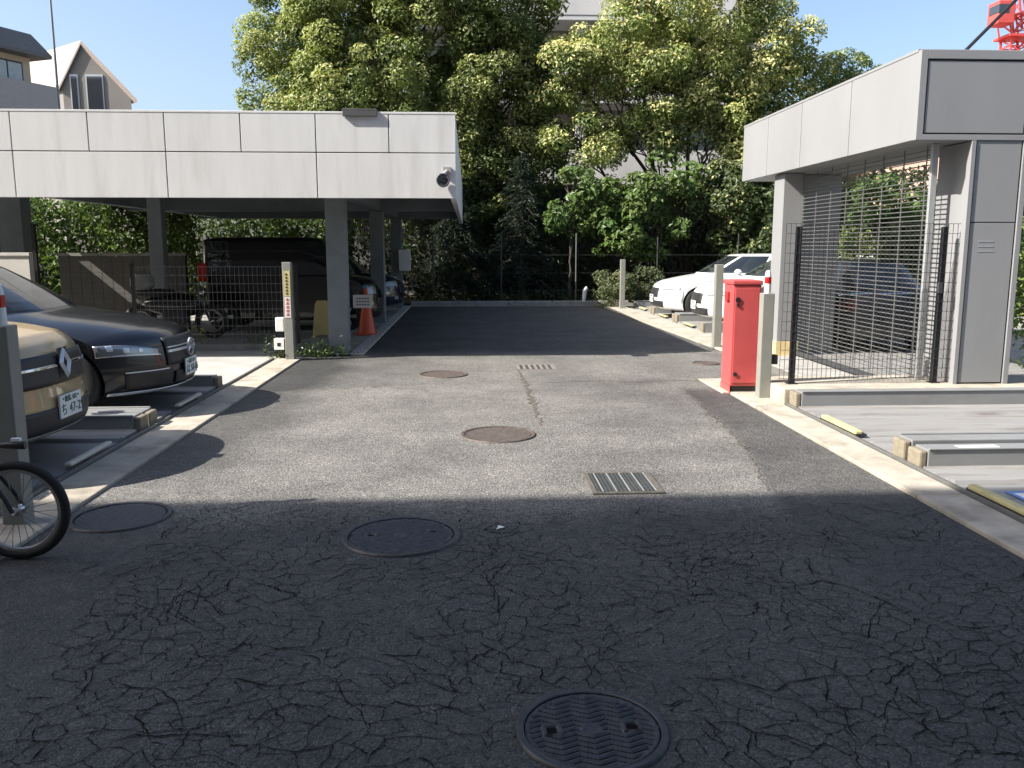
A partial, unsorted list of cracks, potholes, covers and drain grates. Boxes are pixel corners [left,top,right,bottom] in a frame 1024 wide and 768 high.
crack [0,503,401,768]
manhole cover [460,426,536,443]
manhole cover [419,370,468,378]
crack [574,502,1024,768]
crack [335,508,672,768]
crack [517,369,777,490]
manhole cover [341,516,461,558]
manhole cover [515,689,670,768]
drain grate [582,471,666,495]
manhole cover [68,501,174,533]
